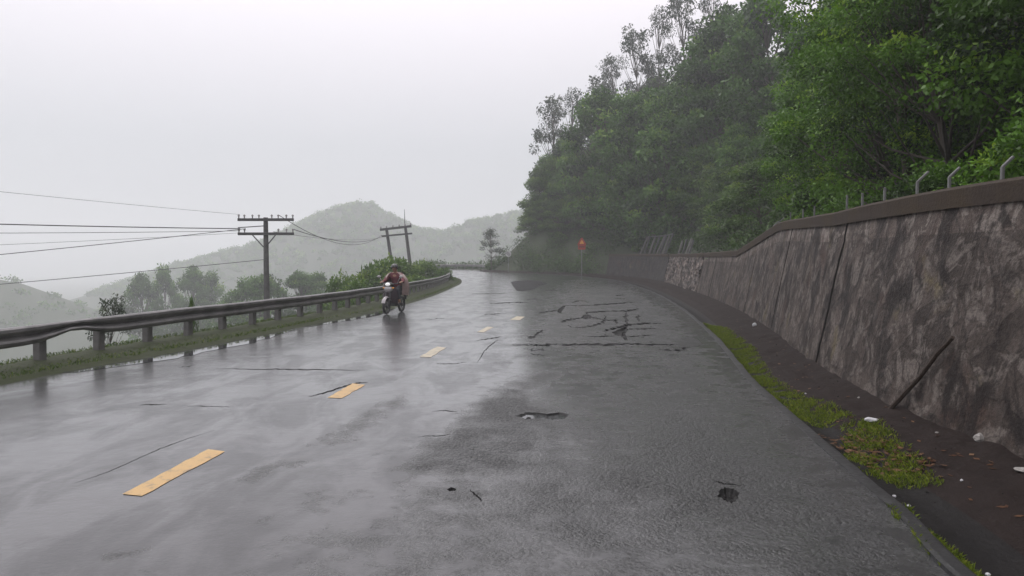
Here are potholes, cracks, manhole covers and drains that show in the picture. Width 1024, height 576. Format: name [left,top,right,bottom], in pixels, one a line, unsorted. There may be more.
pothole [718,487,740,503]
crack [226,368,368,397]
crack [76,430,215,483]
pothole [518,412,569,420]
crack [484,288,685,356]
